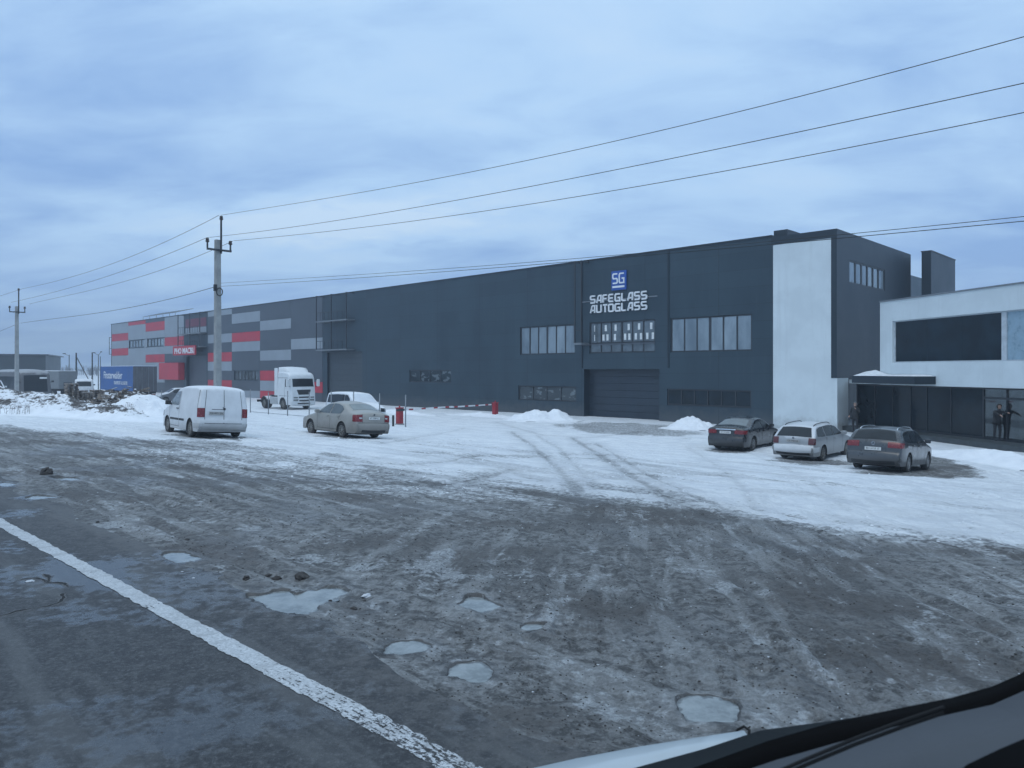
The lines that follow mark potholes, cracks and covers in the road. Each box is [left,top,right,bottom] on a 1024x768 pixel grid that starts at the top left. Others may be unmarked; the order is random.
pothole [233,582,363,619]
pothole [450,590,510,616]
pothole [436,658,503,687]
pothole [664,690,755,732]
pothole [153,550,209,566]
pothole [372,637,440,659]
crack [0,574,69,616]
pothole [516,620,551,633]
